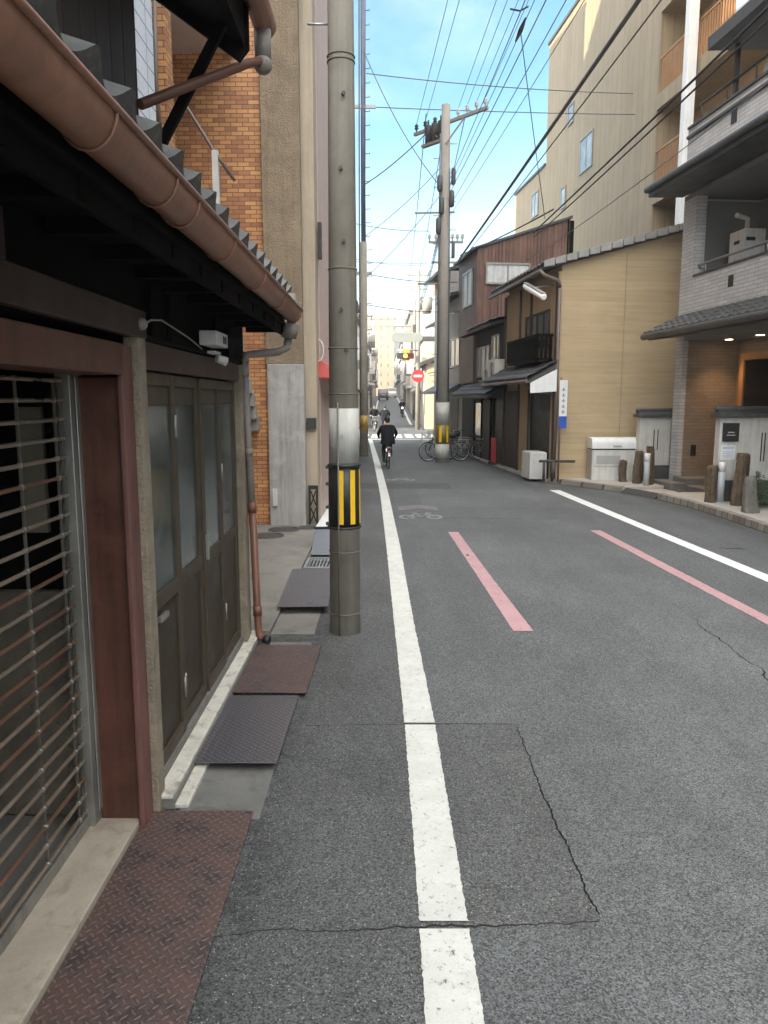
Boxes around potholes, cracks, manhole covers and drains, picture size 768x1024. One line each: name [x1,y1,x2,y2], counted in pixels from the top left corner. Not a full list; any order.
crack [682,610,768,680]
drain grate [304,558,330,568]
